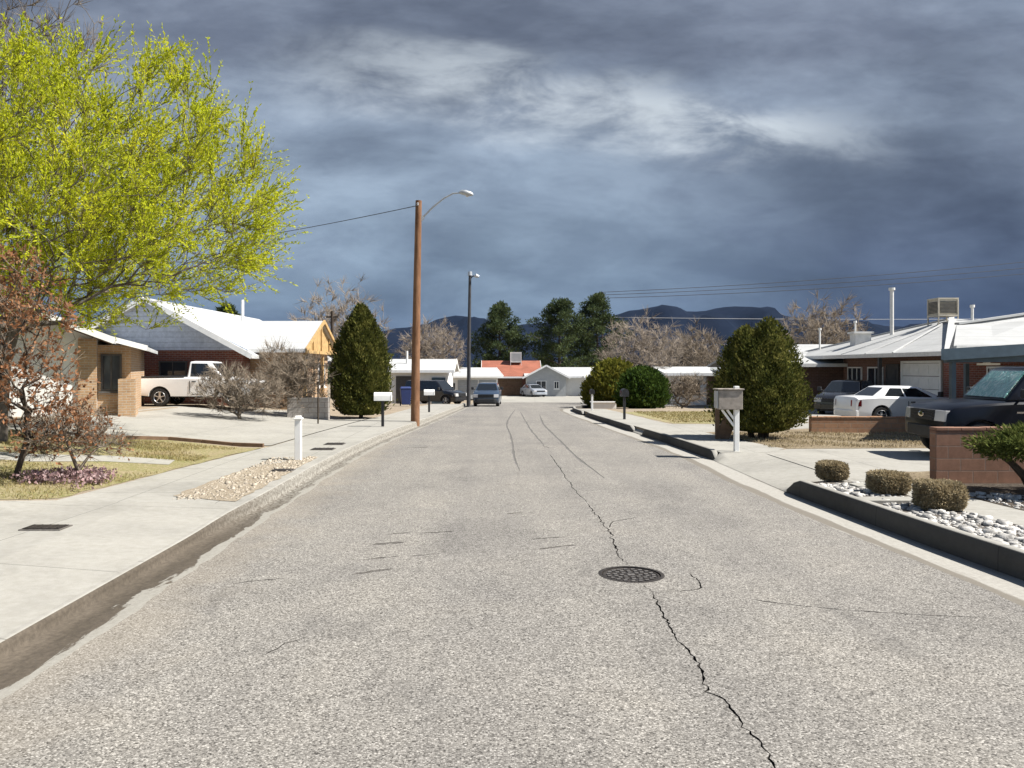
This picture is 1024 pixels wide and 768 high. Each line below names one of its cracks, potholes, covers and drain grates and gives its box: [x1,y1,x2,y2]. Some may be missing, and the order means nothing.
manhole cover [598,566,665,583]
crack [506,410,632,563]
crack [644,572,776,768]
